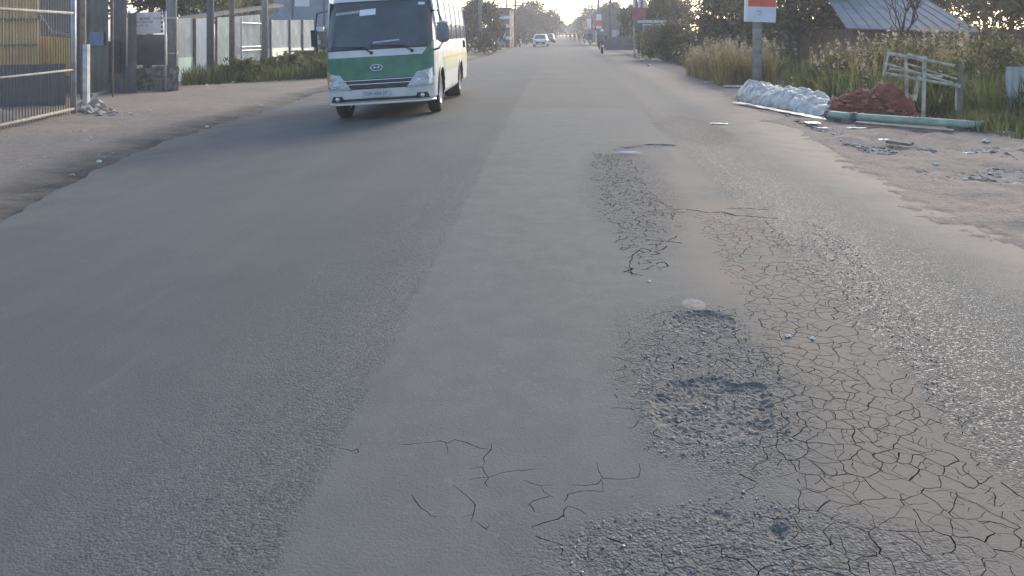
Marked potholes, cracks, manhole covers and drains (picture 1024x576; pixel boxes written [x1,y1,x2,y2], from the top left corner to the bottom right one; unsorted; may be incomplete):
crack [590,152,684,276]
crack [694,208,778,219]
pothole [667,310,737,337]
crack [404,213,1024,576]
pothole [649,377,776,444]
